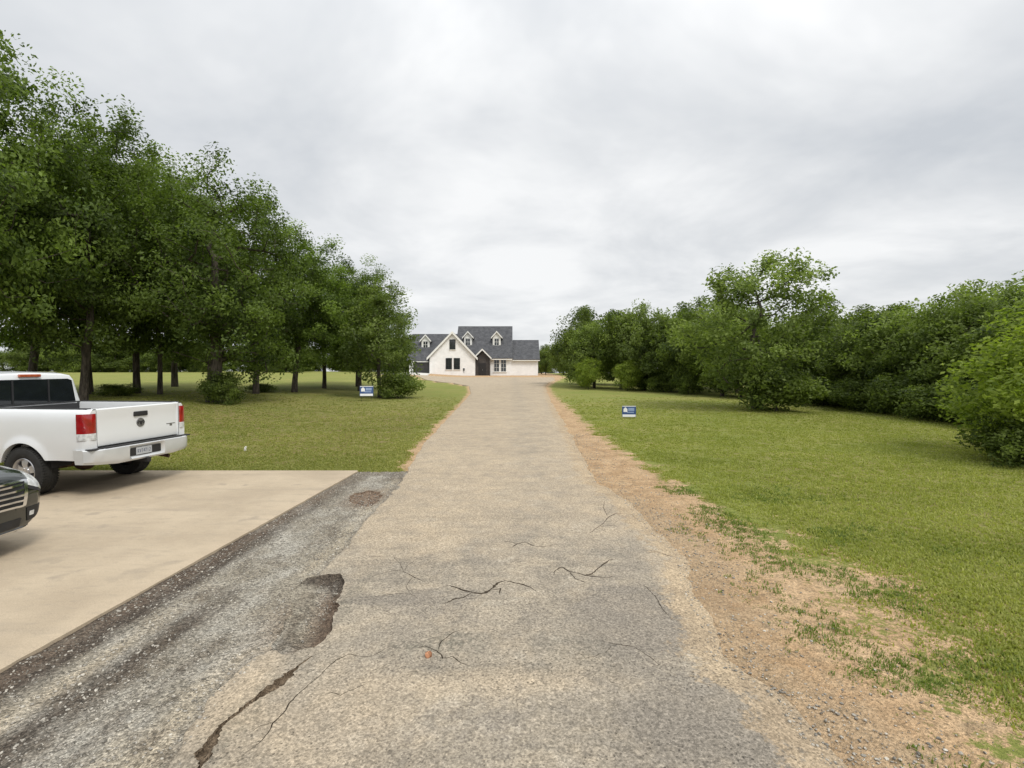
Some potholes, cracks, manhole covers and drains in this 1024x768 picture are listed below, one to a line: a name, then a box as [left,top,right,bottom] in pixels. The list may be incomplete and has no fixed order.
crack [194,642,399,768]
crack [442,559,614,604]
crack [418,629,470,666]
crack [368,556,428,598]
pothole [271,573,345,655]
